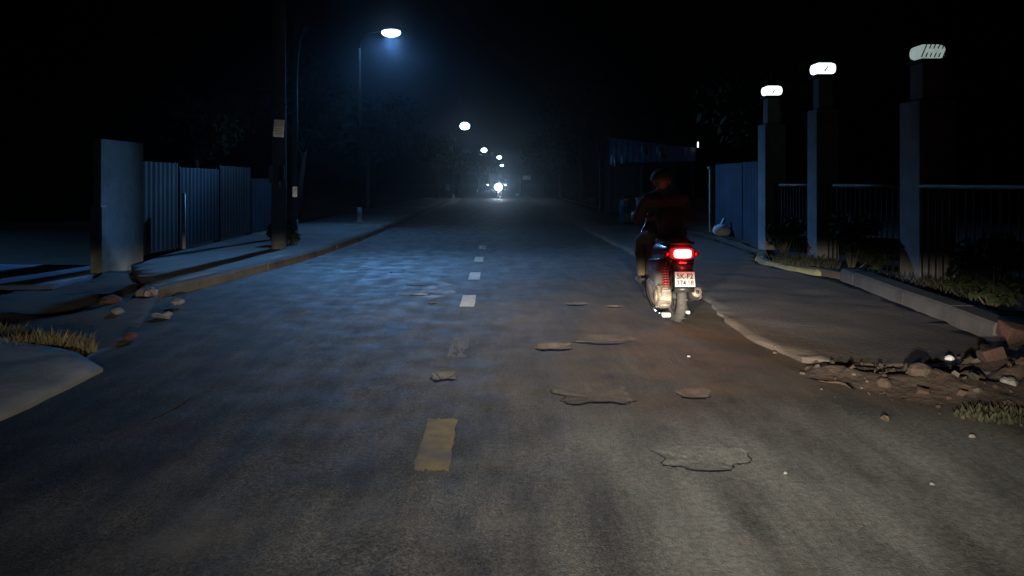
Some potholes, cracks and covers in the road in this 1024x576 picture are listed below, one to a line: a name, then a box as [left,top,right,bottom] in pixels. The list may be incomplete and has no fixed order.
crack [150,398,191,420]
